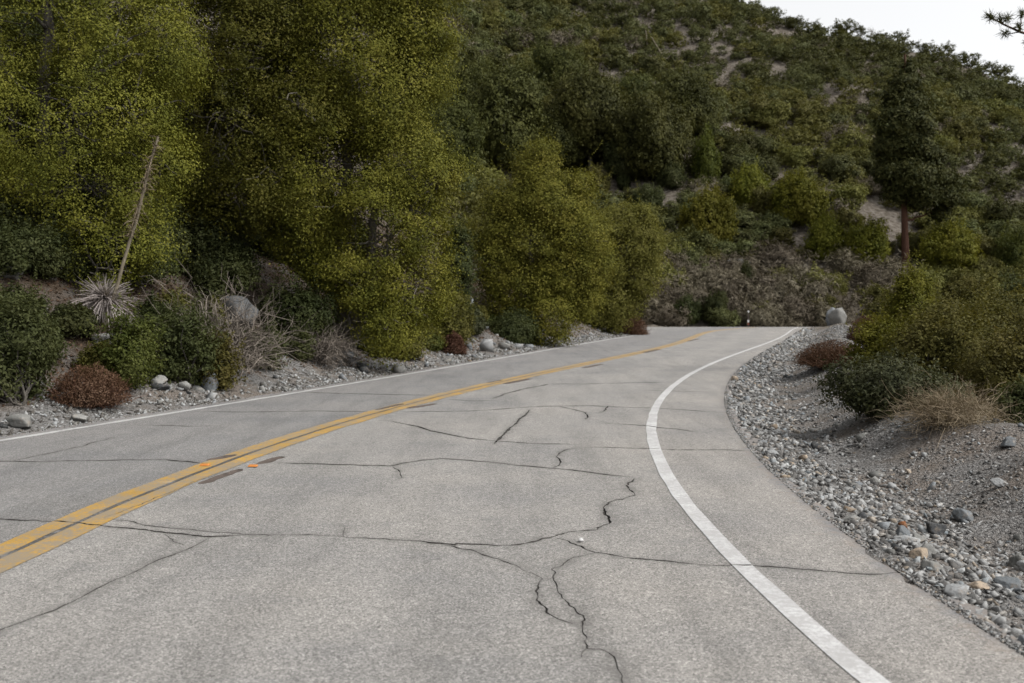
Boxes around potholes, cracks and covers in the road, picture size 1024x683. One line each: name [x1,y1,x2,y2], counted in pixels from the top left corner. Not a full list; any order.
crack [291,447,745,477]
crack [311,384,707,444]
crack [0,479,899,683]
crack [10,438,221,499]
